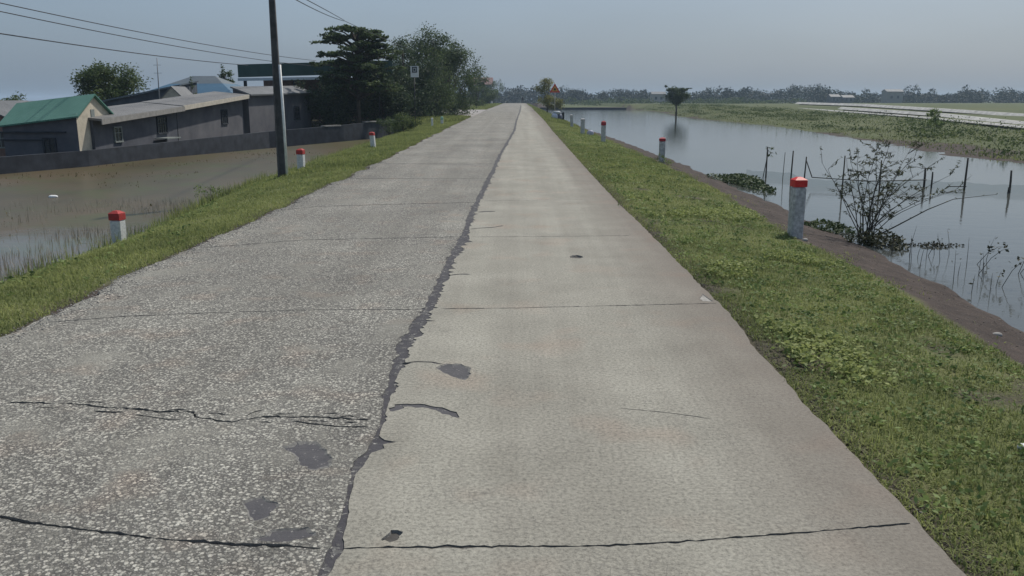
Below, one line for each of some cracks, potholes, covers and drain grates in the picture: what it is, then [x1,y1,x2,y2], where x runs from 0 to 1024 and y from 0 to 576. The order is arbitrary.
pothole [381,530,403,542]
crack [10,106,521,576]
